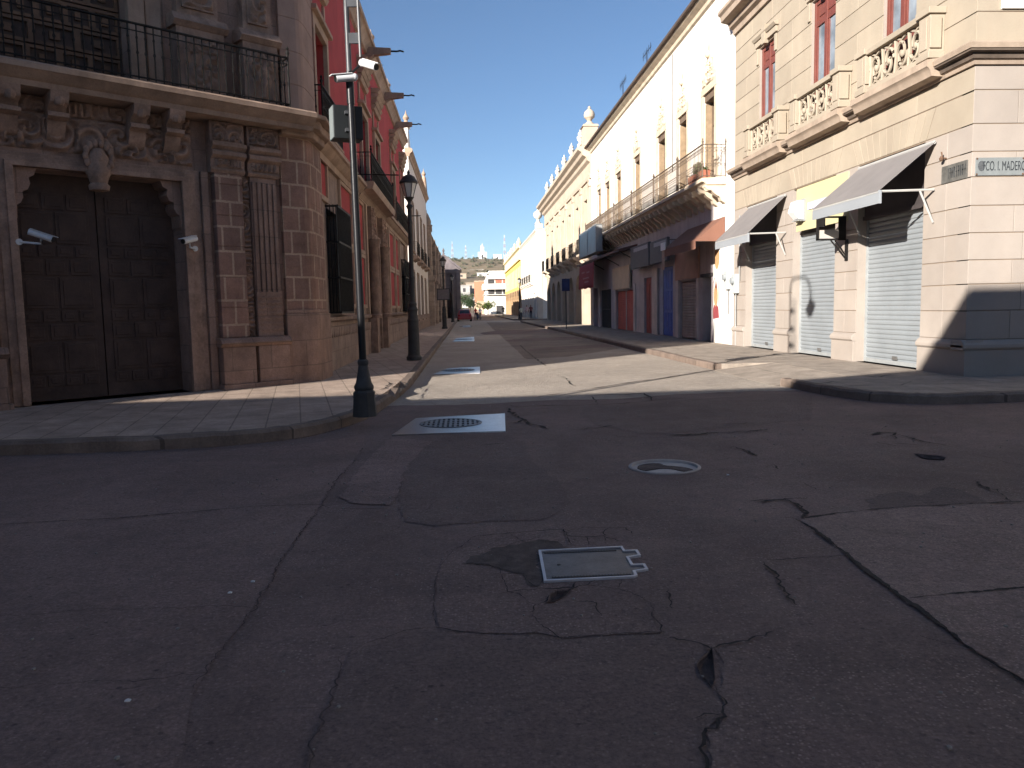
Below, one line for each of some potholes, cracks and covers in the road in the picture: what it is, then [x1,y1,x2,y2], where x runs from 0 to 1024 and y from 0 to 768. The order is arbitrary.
manhole cover [392,413,506,436]
manhole cover [628,459,701,475]
crack [504,378,682,429]
manhole cover [538,546,648,583]
manhole cover [432,367,480,375]
crack [761,481,1022,518]
pothole [546,589,569,603]
crack [763,555,847,604]
crack [910,586,1024,598]
pothole [697,646,715,688]
crack [433,527,772,768]
